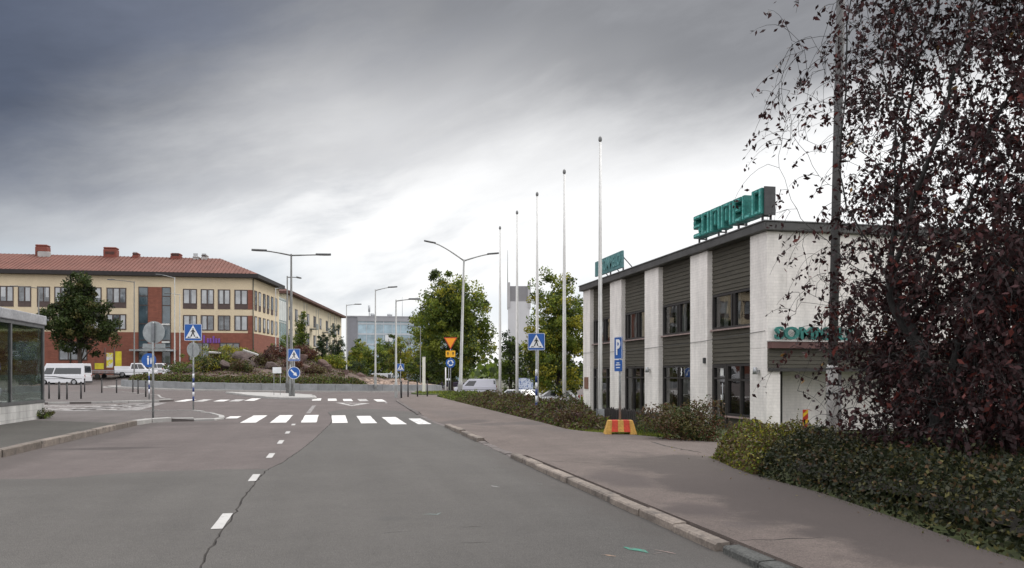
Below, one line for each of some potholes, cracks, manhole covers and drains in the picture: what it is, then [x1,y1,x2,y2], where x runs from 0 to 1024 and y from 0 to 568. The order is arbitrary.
crack [199,415,332,568]
